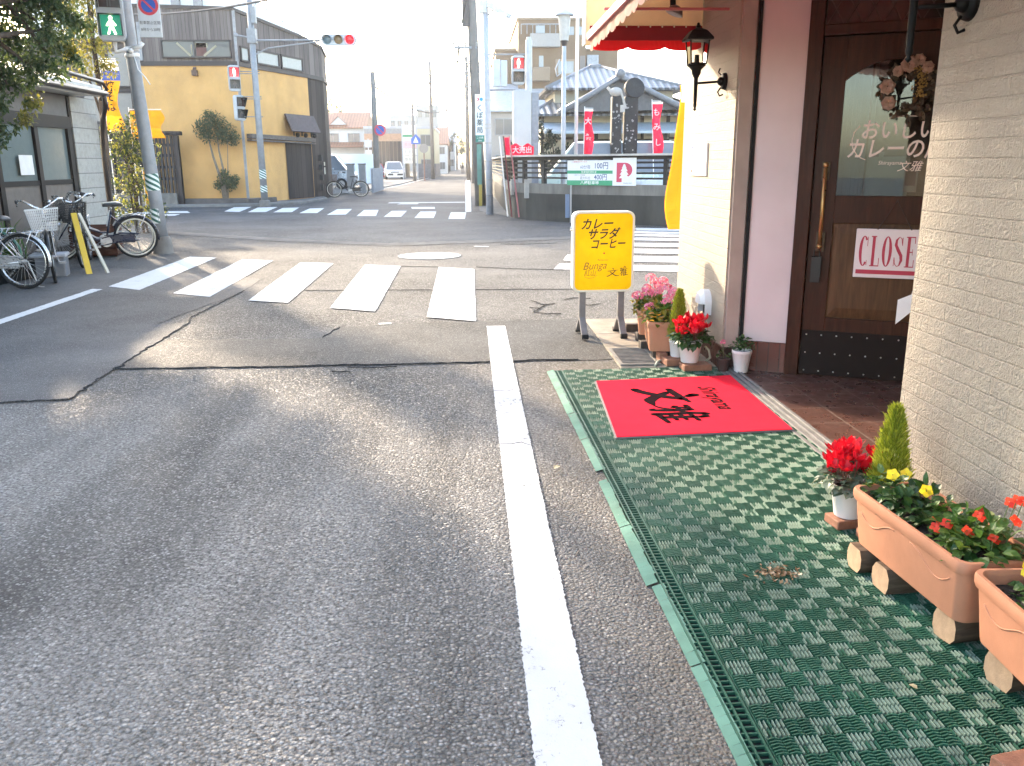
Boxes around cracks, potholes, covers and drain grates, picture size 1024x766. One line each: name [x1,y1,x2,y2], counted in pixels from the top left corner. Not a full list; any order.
drain grate [608,347,661,366]
